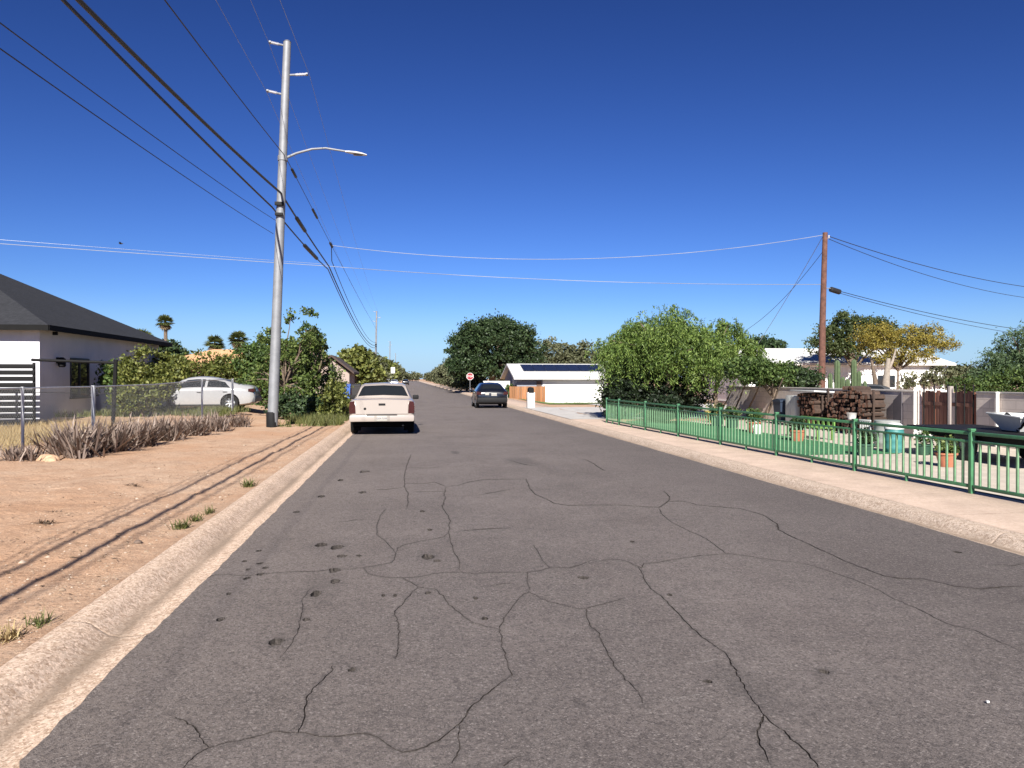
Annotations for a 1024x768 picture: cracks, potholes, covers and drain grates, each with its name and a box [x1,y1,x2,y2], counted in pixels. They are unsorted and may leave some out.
crack [379,459,501,569]
crack [638,567,819,768]
crack [210,479,1021,703]
crack [175,667,517,768]
